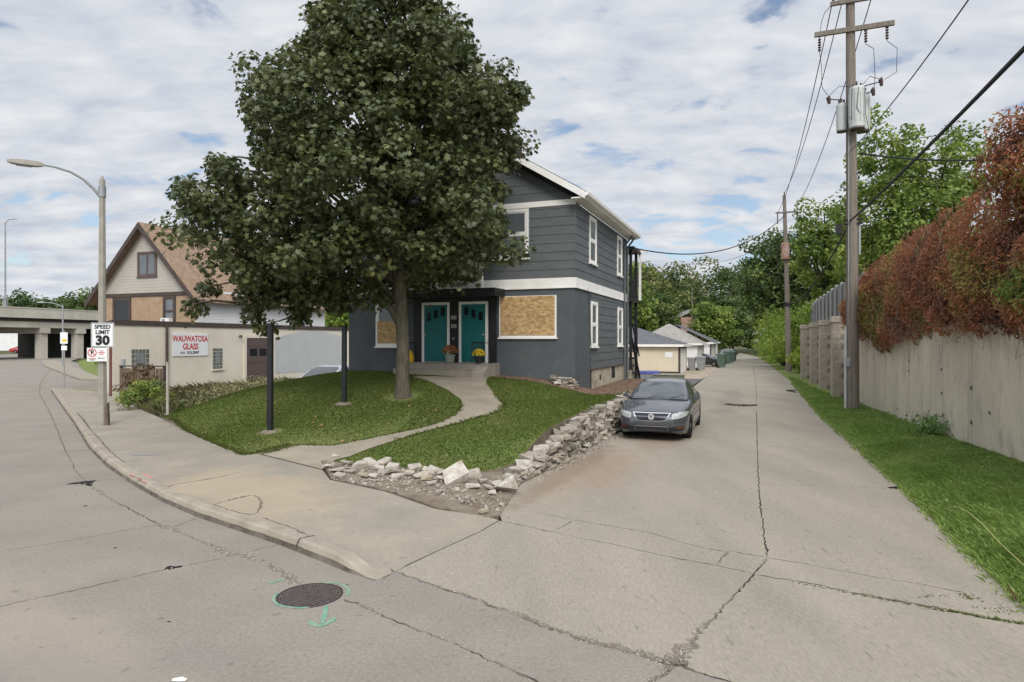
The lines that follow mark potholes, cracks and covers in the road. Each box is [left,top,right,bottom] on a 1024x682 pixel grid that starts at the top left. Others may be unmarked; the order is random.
crack [343,367,1024,682]
crack [0,369,315,607]
manhole cover [276,583,343,609]
